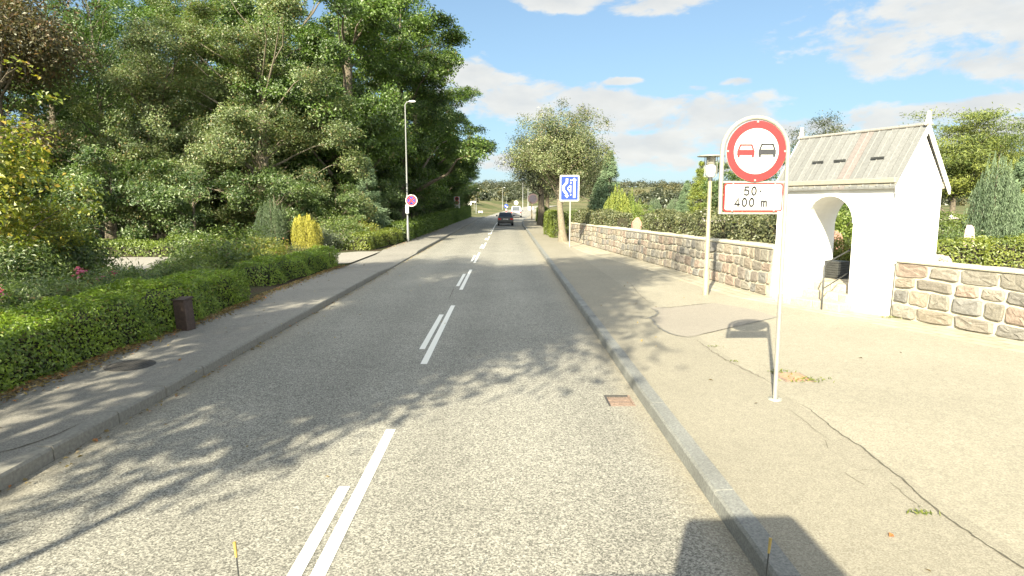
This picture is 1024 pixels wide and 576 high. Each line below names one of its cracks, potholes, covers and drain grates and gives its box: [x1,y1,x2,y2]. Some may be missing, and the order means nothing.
crack [790,404,1024,568]
manhole cover [103,359,156,371]
crack [697,325,766,380]
crack [2,424,78,452]
